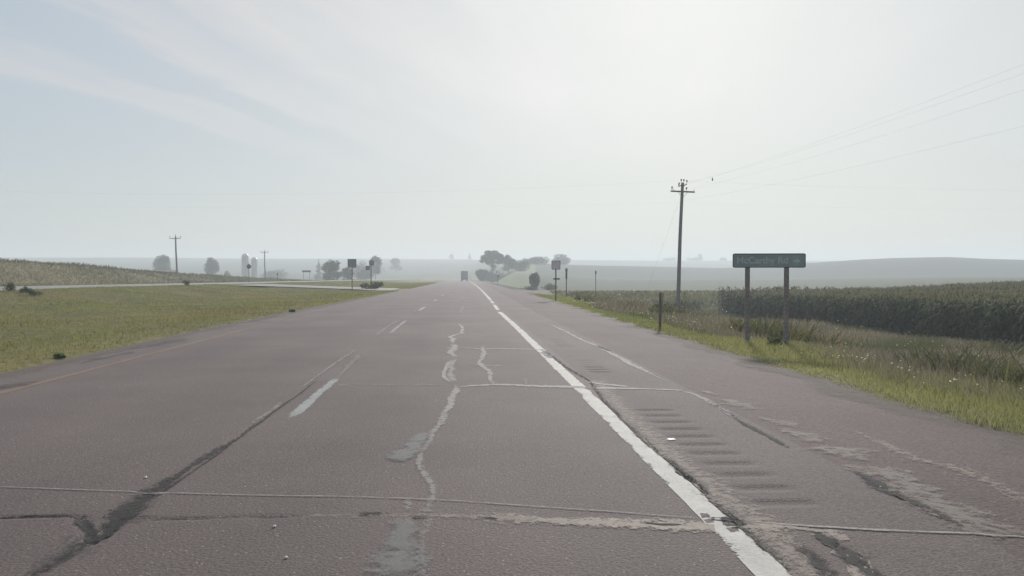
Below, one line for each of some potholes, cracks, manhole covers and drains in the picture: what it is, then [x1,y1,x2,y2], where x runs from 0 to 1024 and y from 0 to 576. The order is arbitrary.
crack [0,295,1024,576]
